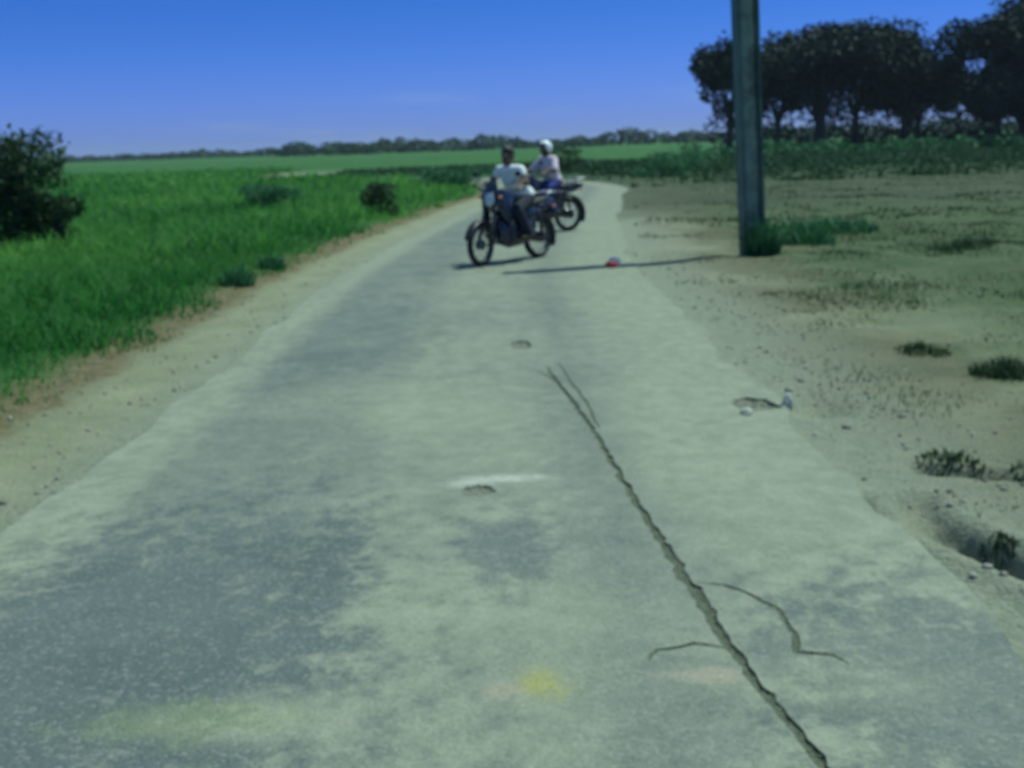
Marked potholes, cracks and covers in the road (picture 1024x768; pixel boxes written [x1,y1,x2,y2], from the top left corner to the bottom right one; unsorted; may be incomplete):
pothole [461,485,496,497]
pothole [732,397,783,411]
crack [535,363,851,768]
pothole [511,340,532,350]
